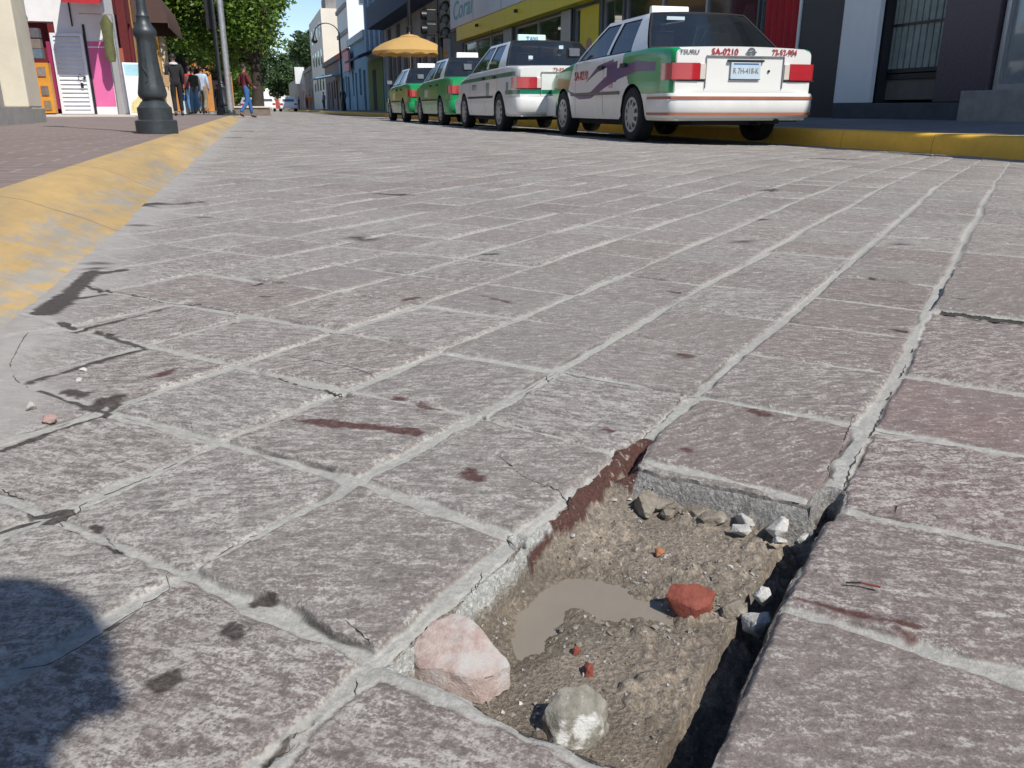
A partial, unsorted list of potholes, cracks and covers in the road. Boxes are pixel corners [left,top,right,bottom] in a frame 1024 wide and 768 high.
crack [939,310,1024,325]
pothole [382,438,847,768]
crack [498,456,573,507]
crack [827,348,914,487]
